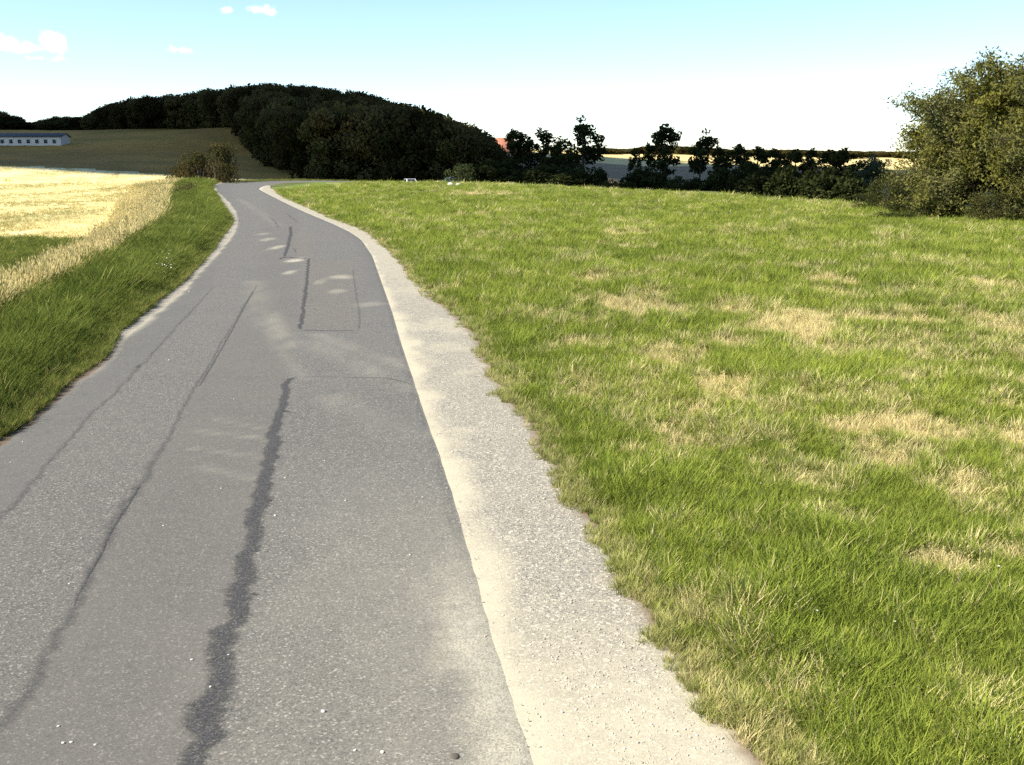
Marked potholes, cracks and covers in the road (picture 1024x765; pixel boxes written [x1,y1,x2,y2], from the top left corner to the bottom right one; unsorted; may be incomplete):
crack [72,291,410,765]
